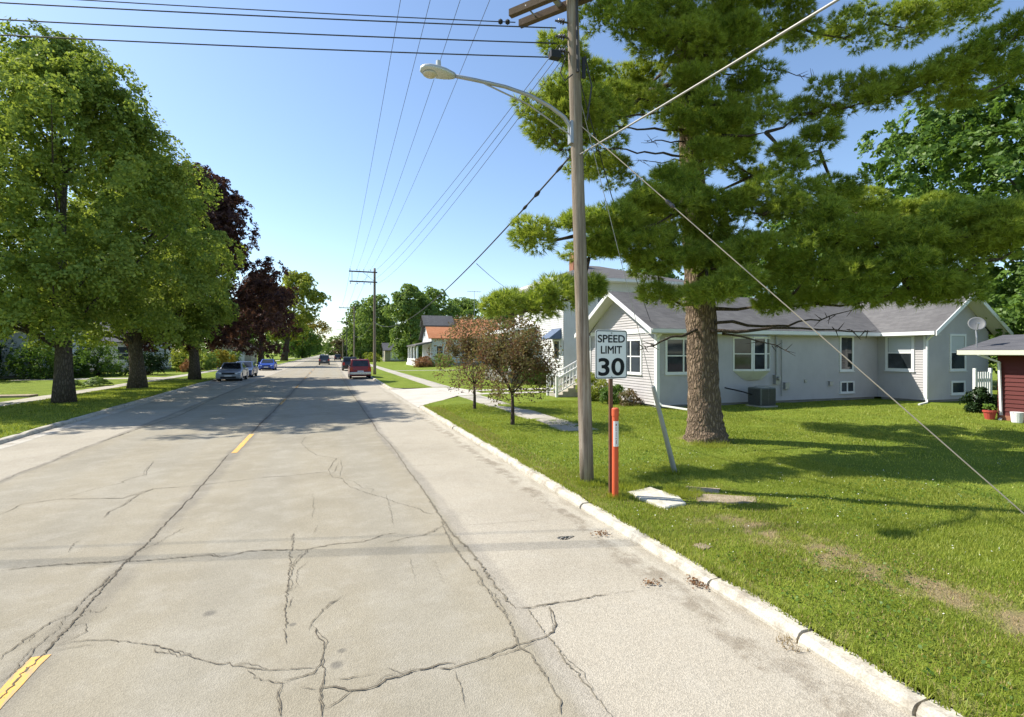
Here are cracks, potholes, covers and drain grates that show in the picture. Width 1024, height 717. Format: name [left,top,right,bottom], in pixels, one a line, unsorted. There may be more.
crack [0,439,634,716]
